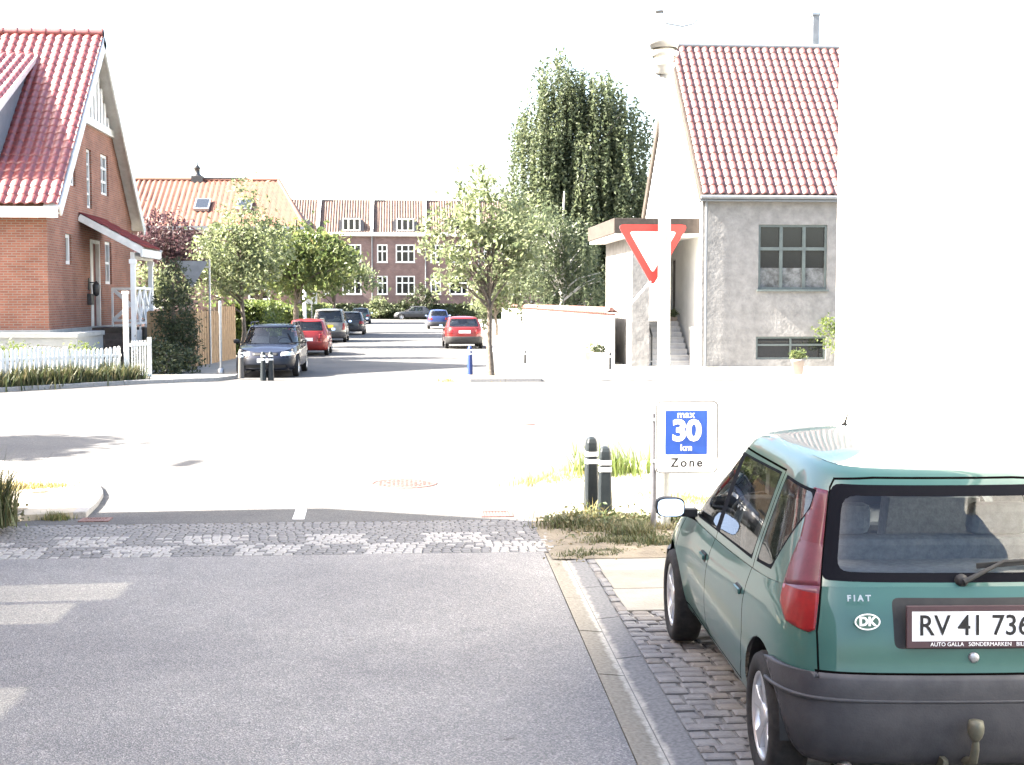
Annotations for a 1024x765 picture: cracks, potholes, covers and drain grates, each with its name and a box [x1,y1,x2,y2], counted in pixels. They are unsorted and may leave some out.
drain grate [480,511,514,521]
drain grate [78,517,113,526]
manhole cover [370,479,437,489]
